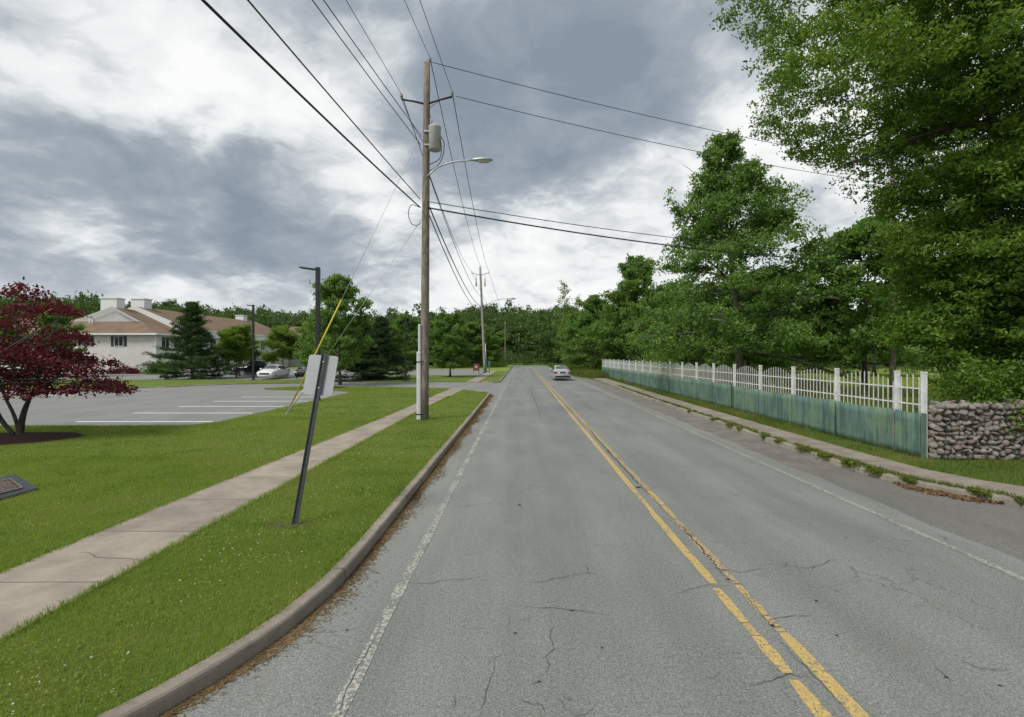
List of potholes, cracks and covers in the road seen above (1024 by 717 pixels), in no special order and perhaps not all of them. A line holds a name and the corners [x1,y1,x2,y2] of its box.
crack [517,606,611,712]
